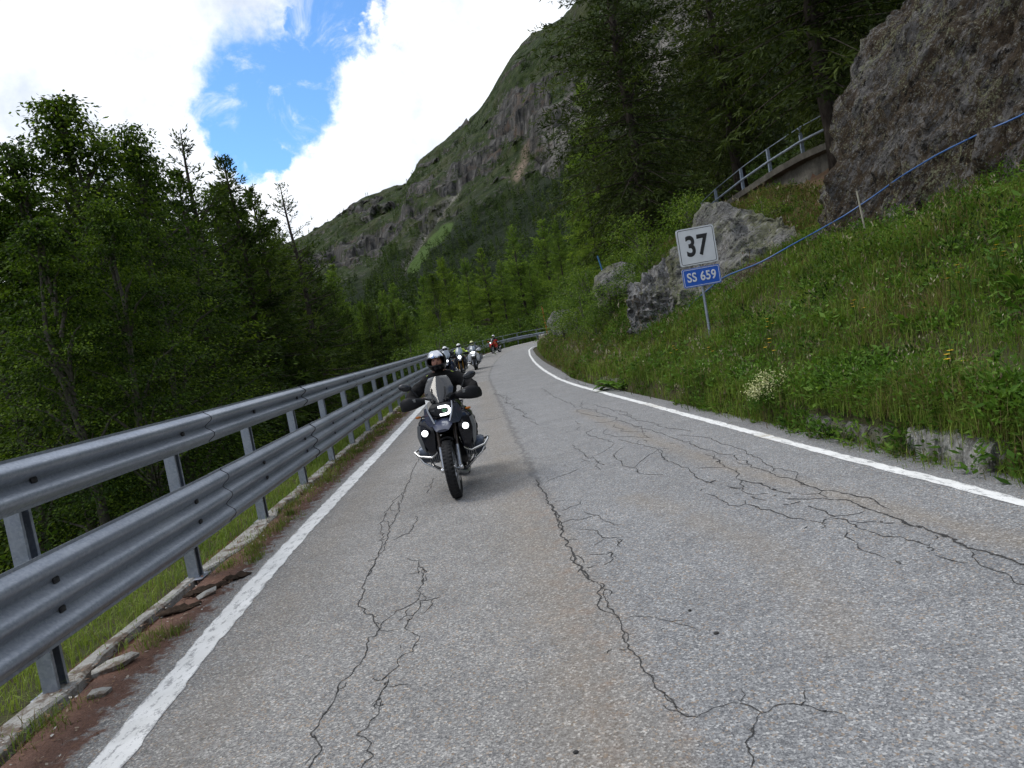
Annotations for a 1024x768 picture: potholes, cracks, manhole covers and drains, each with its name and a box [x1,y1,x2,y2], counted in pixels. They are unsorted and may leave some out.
crack [536,402,1024,767]
crack [305,459,439,768]
